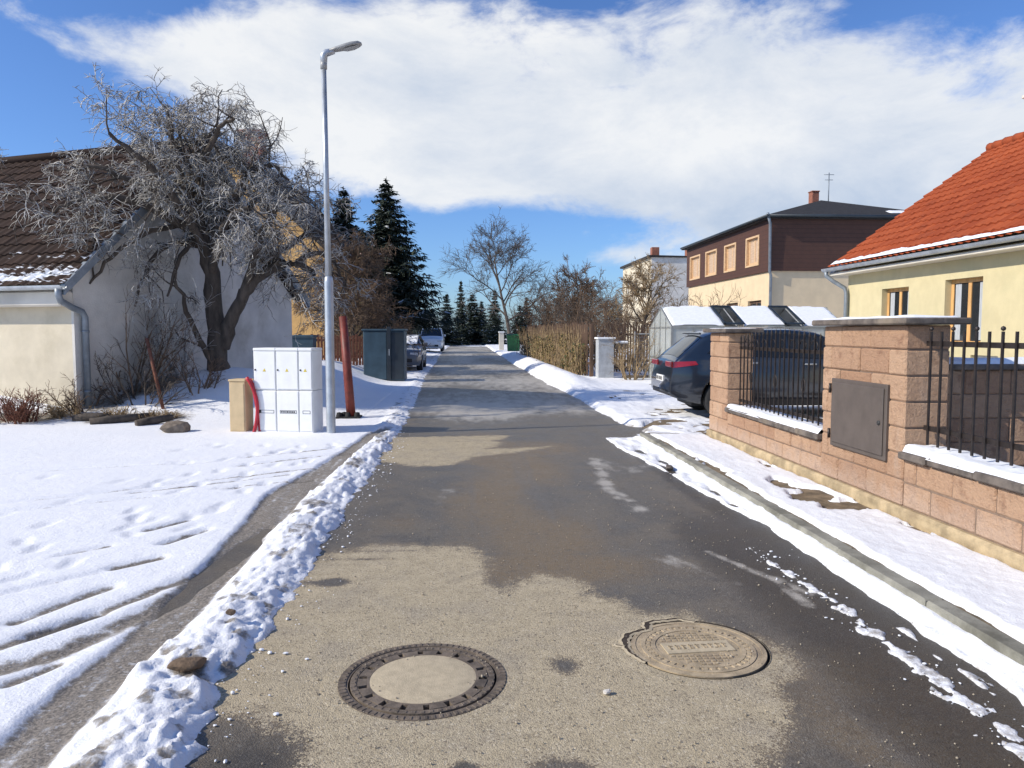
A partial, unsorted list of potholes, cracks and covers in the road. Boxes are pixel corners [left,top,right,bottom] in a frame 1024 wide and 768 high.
manhole cover [630,621,771,680]
manhole cover [338,643,506,721]
